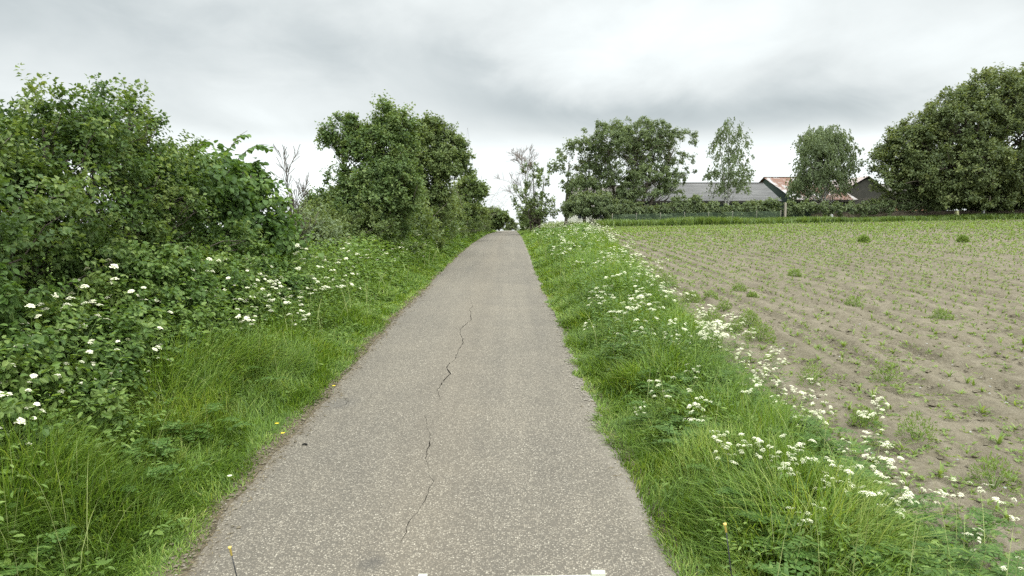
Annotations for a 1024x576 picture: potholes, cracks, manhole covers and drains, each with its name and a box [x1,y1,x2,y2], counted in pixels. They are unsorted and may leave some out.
crack [437,305,473,397]
crack [401,419,434,541]
